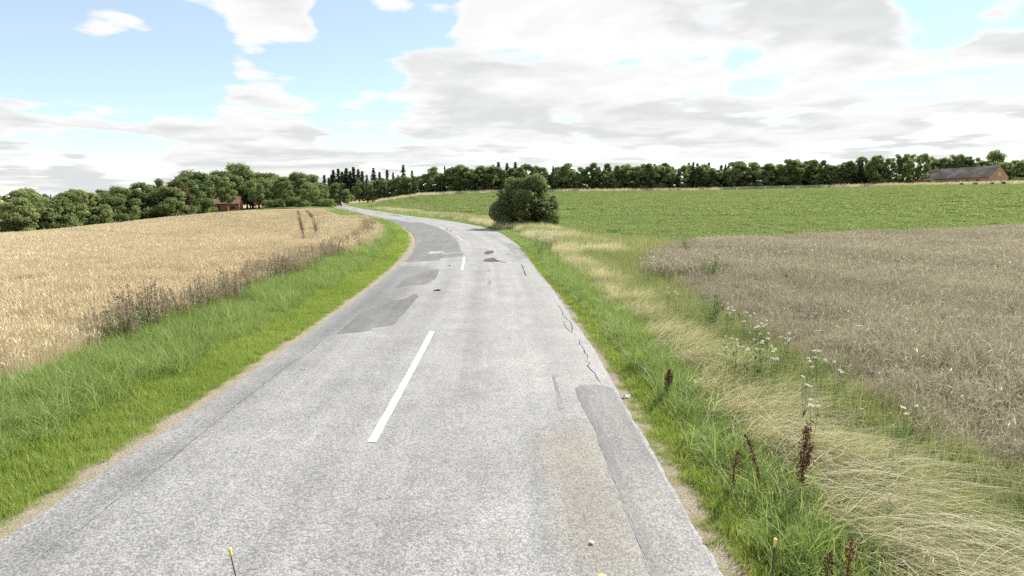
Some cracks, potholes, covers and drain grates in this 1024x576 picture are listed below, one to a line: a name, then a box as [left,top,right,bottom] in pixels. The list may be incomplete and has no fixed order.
crack [559,306,602,385]
